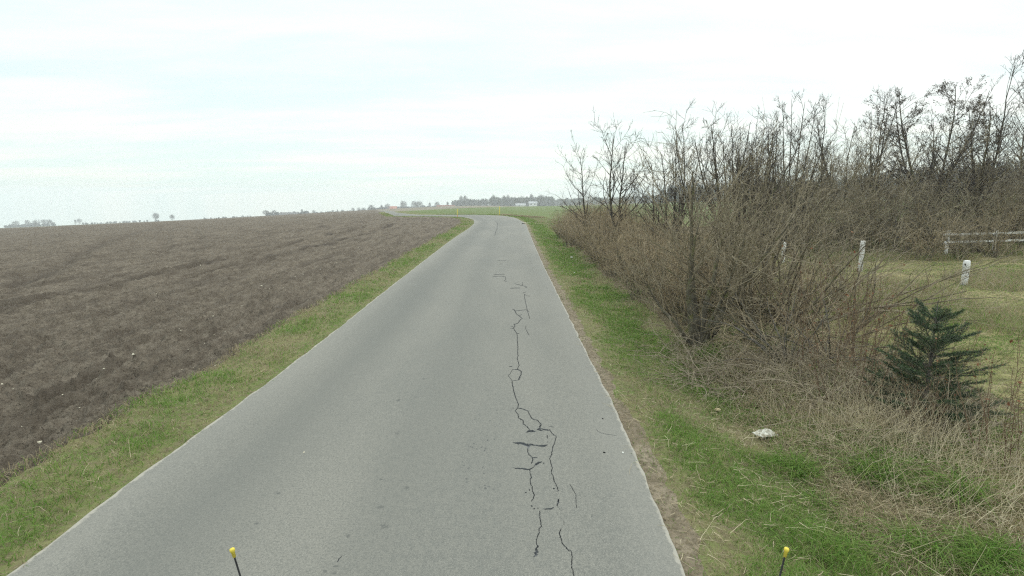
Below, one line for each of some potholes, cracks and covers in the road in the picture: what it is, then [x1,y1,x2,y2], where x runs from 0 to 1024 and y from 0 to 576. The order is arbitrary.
crack [493,260,577,576]
